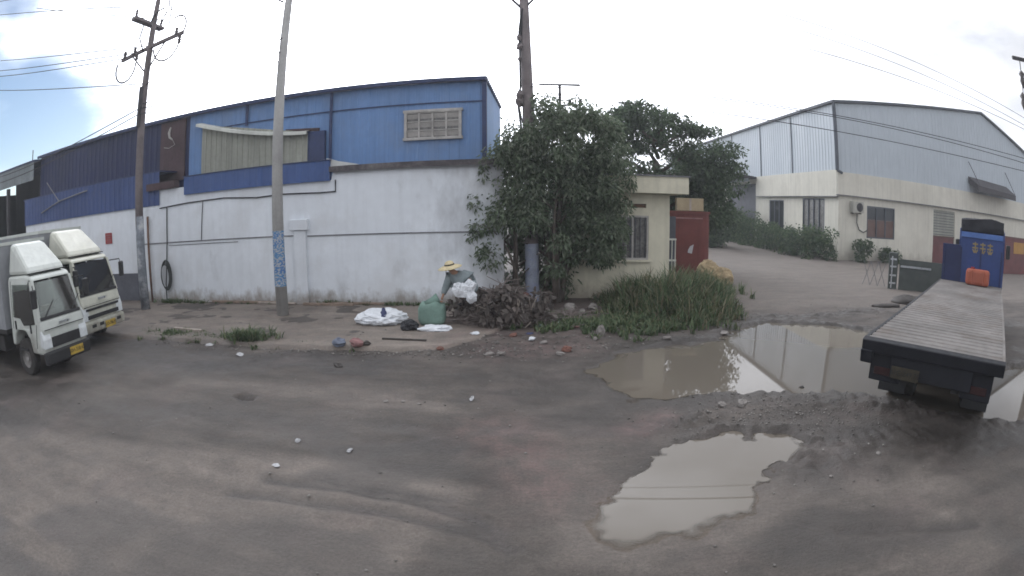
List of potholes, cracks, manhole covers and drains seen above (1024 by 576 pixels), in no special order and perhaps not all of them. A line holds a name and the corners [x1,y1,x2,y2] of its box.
pothole [564,421,821,563]
pothole [581,319,1024,425]
pothole [229,391,263,404]
